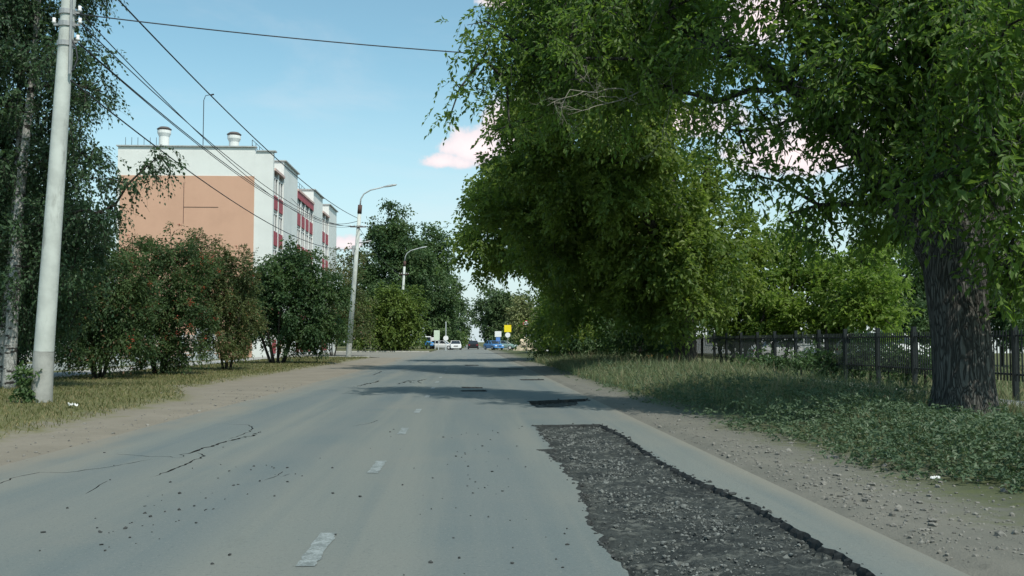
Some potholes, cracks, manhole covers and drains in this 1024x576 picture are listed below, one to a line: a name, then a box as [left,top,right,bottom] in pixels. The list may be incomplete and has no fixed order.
crack [1,424,261,483]
pothole [527,398,590,408]
pothole [531,423,882,576]
